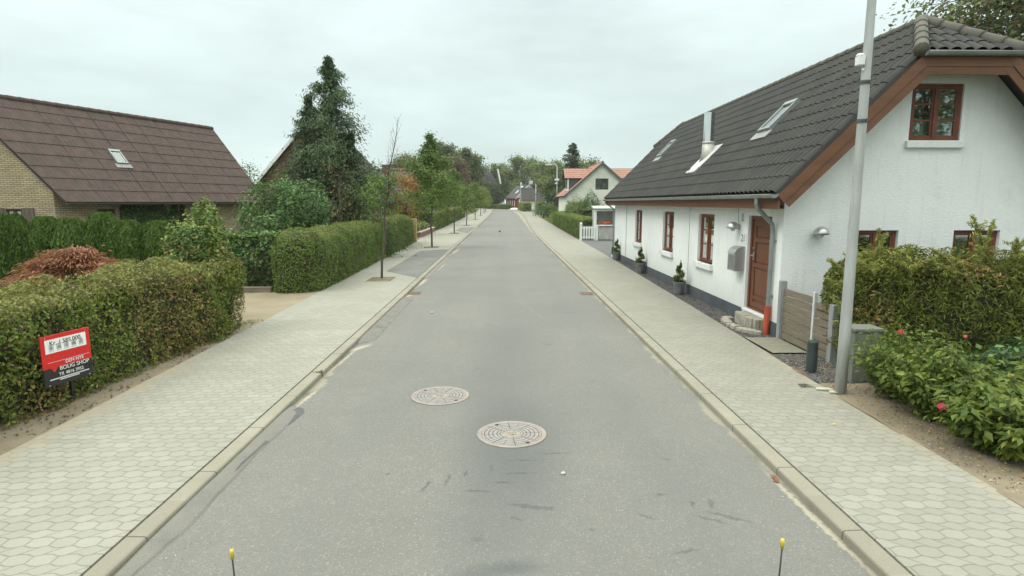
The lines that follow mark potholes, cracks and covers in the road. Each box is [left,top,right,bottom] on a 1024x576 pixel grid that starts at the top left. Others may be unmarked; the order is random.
manhole cover [477,421,546,448]
manhole cover [411,386,469,406]
